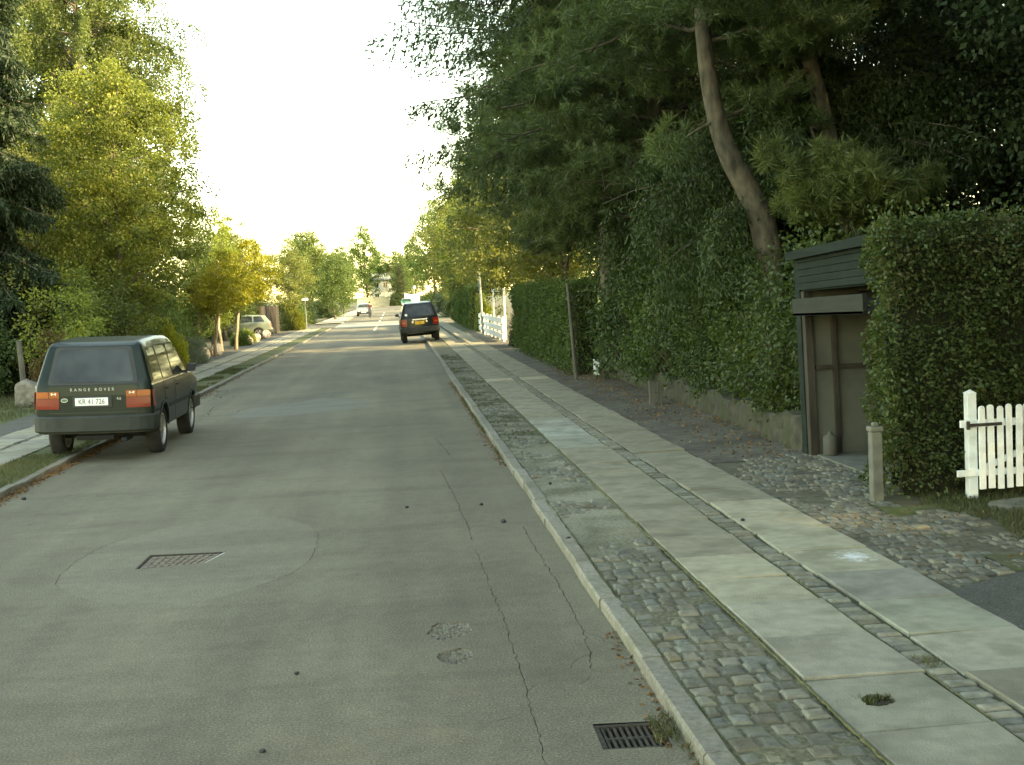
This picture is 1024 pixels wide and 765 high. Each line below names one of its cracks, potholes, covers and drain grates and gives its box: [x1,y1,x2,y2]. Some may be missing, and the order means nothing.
drain grate [593,722,672,750]
pothole [426,621,472,641]
crack [476,550,547,765]
pothole [861,694,898,706]
pothole [436,648,473,664]
crack [523,527,622,682]
